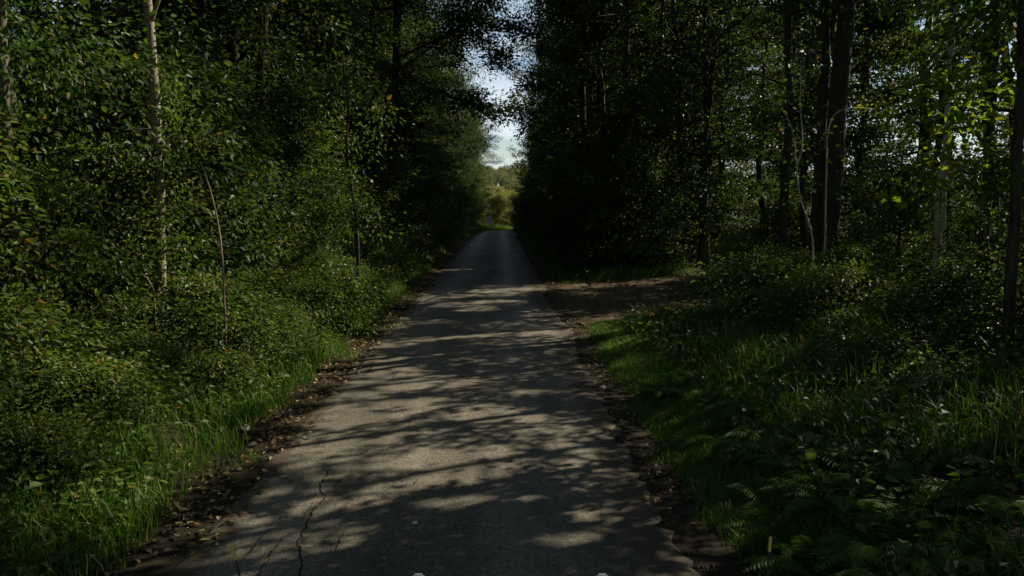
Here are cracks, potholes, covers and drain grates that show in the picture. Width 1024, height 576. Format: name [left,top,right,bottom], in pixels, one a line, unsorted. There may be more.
crack [244,468,331,576]
